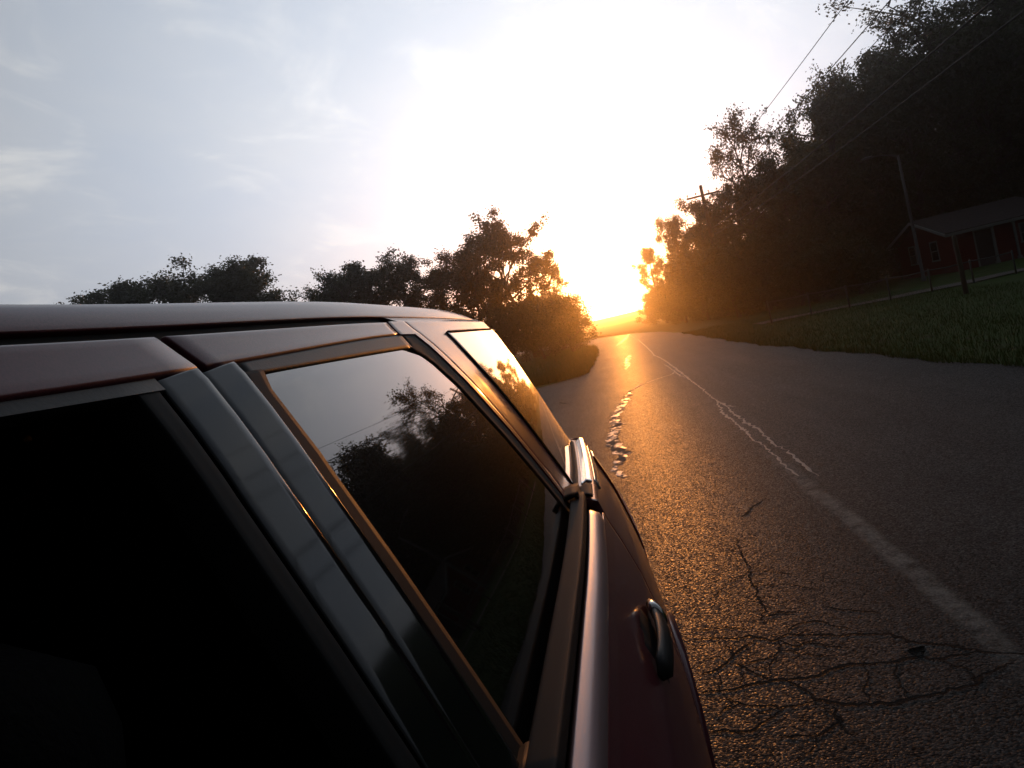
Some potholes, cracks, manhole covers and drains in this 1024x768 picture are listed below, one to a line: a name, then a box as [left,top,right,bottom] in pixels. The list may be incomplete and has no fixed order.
crack [694,540,1024,763]
